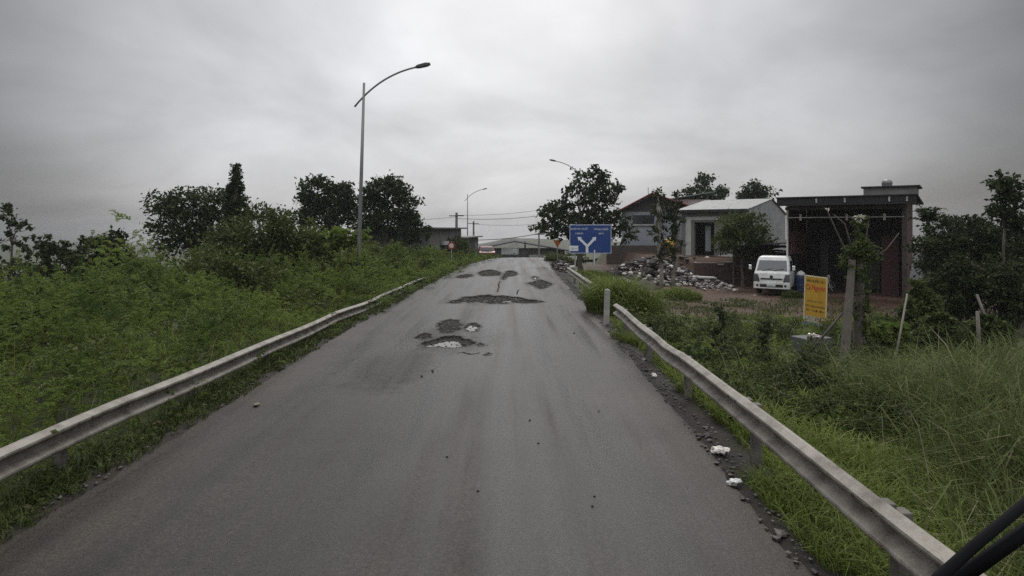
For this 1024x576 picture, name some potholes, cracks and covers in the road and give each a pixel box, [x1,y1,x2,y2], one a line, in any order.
pothole [418,335,478,349]
pothole [444,294,548,304]
pothole [526,279,554,290]
pothole [499,270,519,280]
pothole [412,332,436,340]
pothole [435,318,465,334]
pothole [461,322,483,332]
